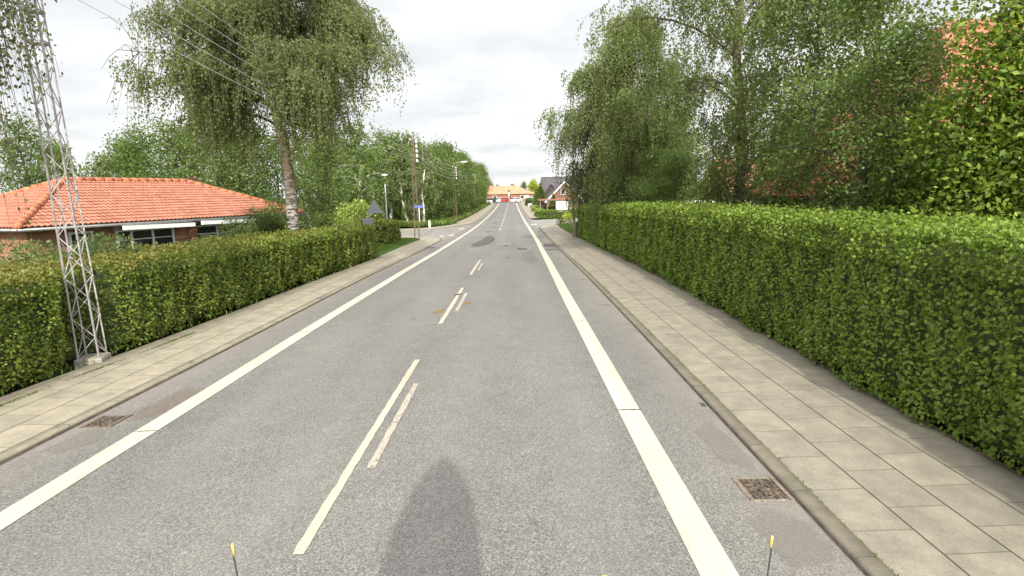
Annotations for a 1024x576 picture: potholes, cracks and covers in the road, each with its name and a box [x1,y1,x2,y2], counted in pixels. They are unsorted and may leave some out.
drain grate [79,414,132,428]
drain grate [732,476,795,501]
